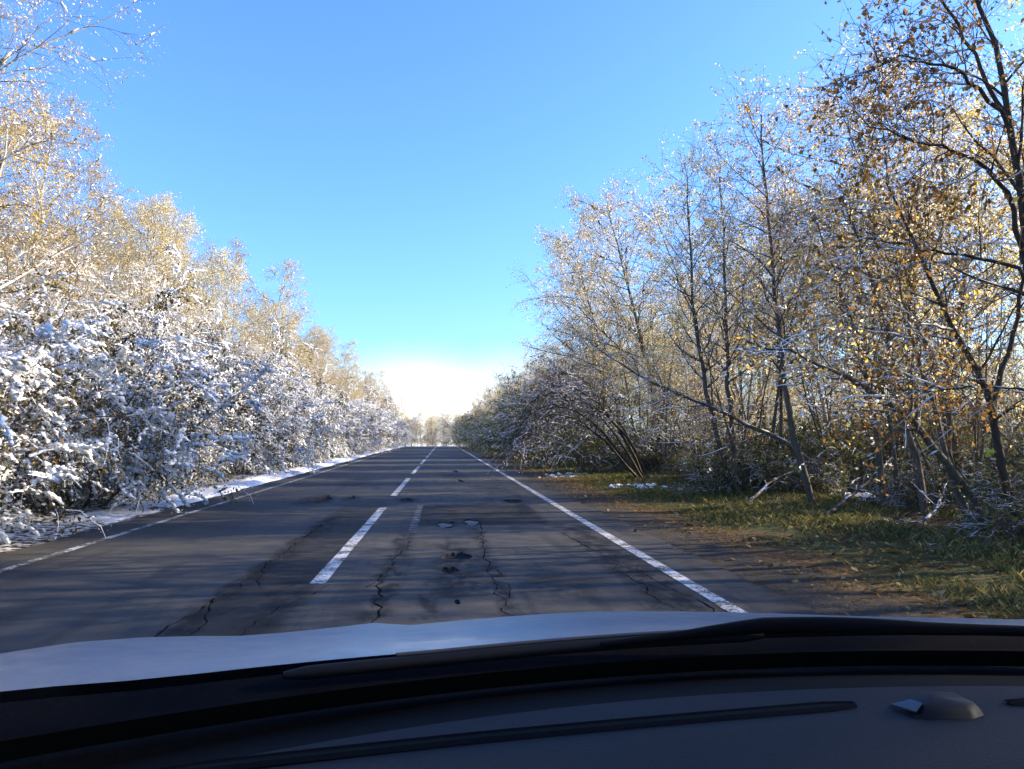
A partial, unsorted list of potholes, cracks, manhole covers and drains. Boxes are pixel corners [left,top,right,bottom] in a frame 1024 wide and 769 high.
crack [366,541,410,623]
pothole [442,552,473,560]
crack [478,525,553,616]
pothole [309,495,333,503]
crack [154,524,328,637]
crack [557,531,715,612]
